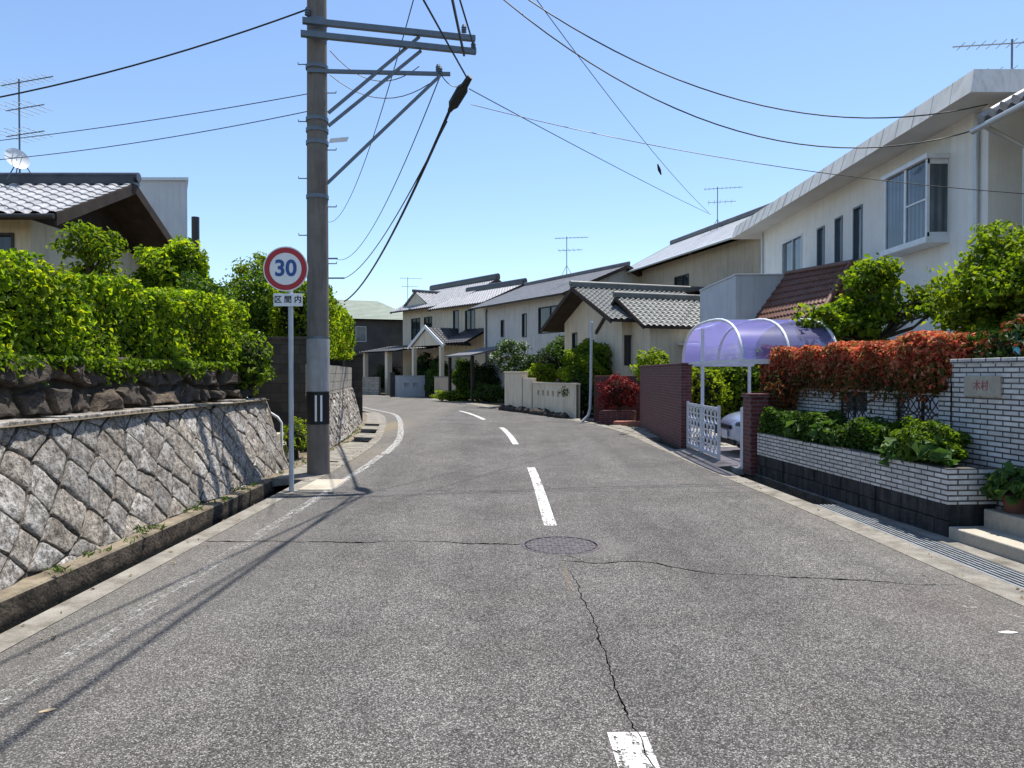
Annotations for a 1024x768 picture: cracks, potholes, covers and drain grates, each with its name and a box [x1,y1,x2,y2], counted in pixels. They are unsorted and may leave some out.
drain grate [906,541,1010,571]
drain grate [855,520,937,543]
drain grate [975,569,1024,589]
drain grate [815,504,882,522]
crack [559,555,957,768]
manhole cover [521,536,601,555]
